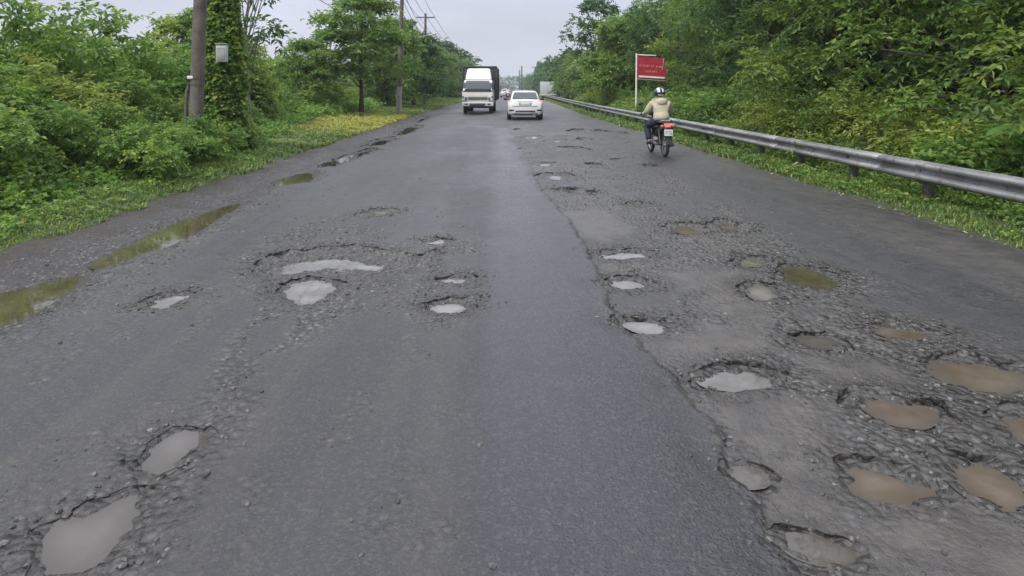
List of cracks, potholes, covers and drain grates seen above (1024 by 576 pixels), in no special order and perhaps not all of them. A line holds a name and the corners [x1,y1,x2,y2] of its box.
pothole [687,360,789,393]
pothole [783,331,856,356]
pothole [609,313,683,335]
pothole [924,448,1024,513]
pothole [419,295,479,315]
pothole [913,349,1024,395]
pothole [275,274,348,305]
pothole [835,384,964,435]
pothole [717,457,782,496]
pothole [831,453,967,510]
pothole [20,485,160,576]
pothole [139,290,196,310]
